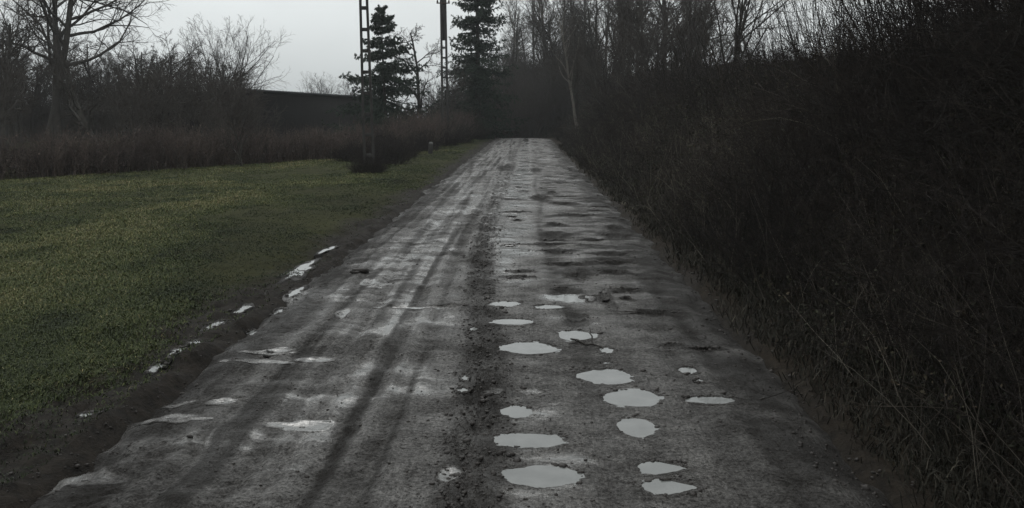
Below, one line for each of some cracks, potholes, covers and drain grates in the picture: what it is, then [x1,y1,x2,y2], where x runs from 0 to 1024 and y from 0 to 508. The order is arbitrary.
pothole [470,428,585,453]
pothole [482,339,575,358]
pothole [672,365,704,375]
pothole [479,317,545,327]
pothole [625,474,710,500]
pothole [530,293,596,305]
pothole [674,394,749,406]
pothole [585,386,678,413]
pothole [560,363,650,389]
pothole [480,299,531,308]
